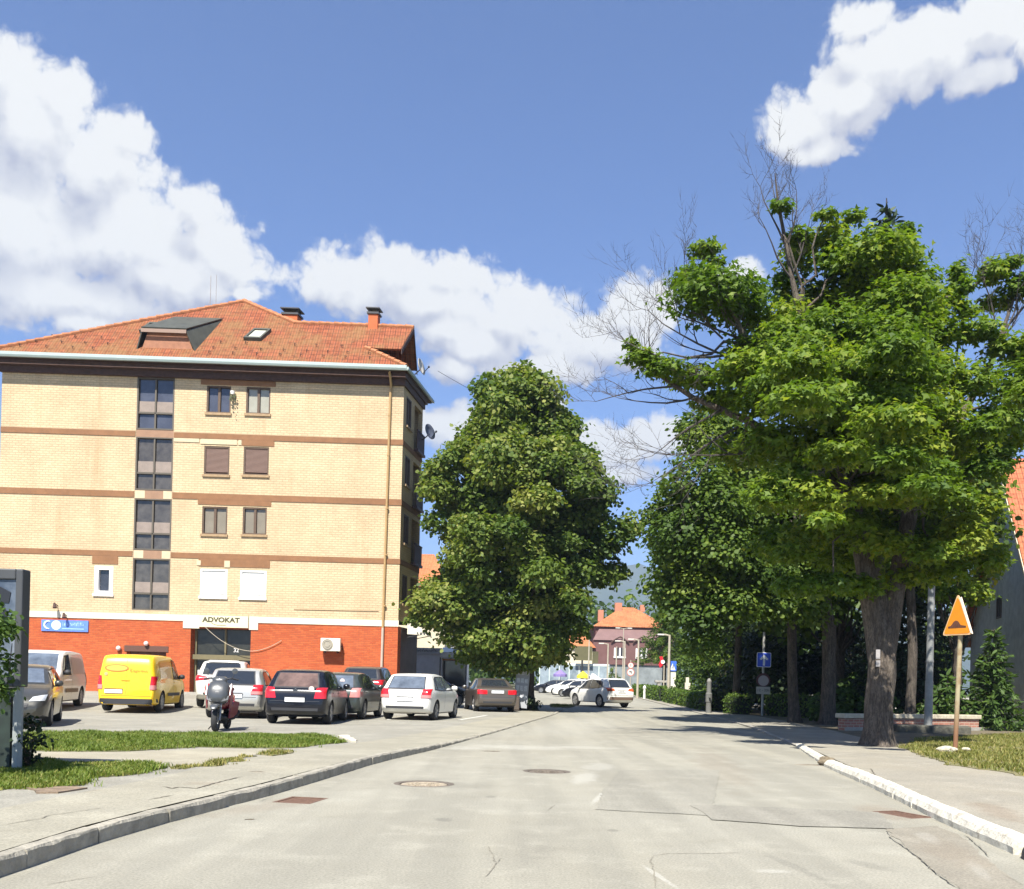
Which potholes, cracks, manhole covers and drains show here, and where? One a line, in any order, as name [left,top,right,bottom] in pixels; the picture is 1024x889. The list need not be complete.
crack [887,828,959,887]
